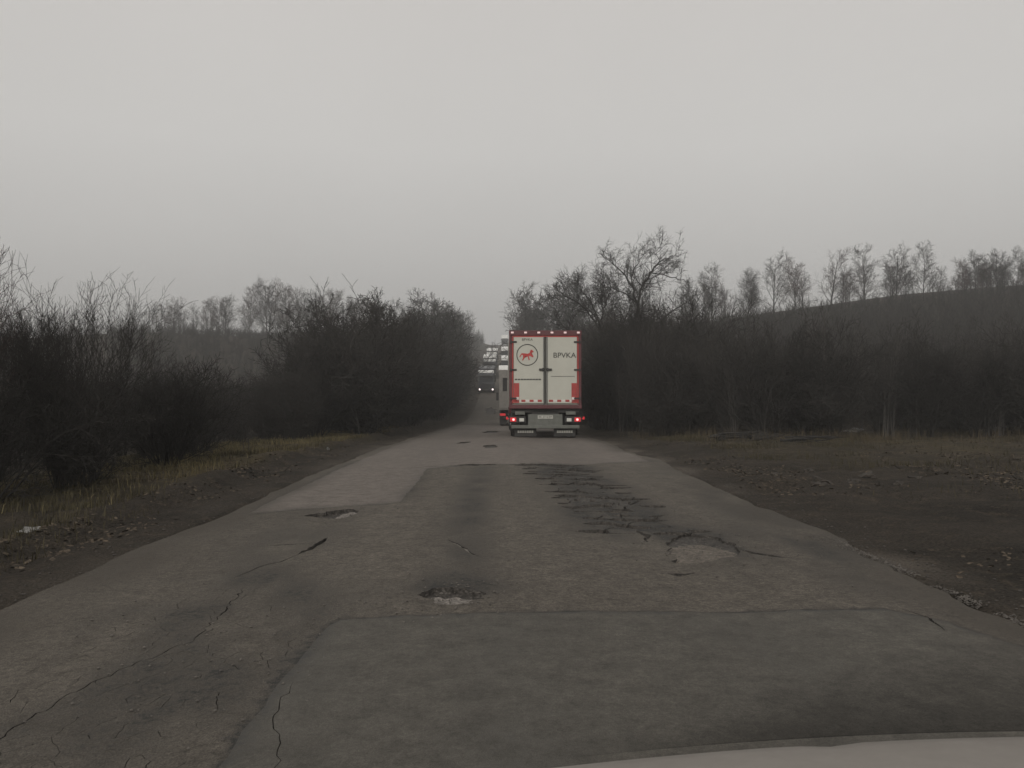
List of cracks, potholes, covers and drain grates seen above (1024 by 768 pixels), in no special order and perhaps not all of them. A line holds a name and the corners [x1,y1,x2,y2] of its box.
pothole [305,509,358,519]
crack [0,578,295,768]
pothole [419,587,486,605]
pothole [665,534,740,564]
crack [239,538,327,576]
